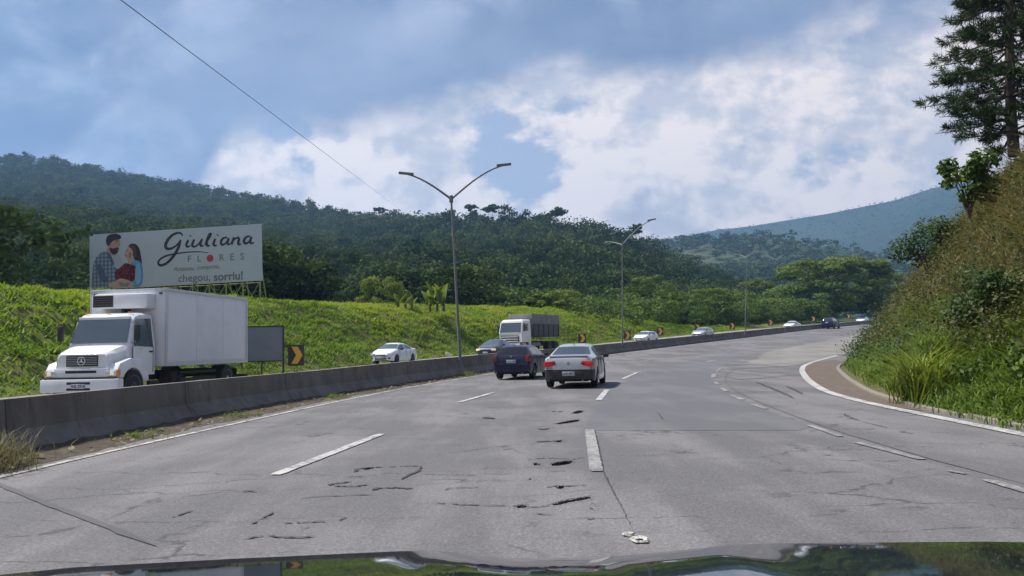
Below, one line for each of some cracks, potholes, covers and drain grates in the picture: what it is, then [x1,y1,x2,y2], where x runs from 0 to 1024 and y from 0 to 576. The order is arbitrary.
crack [304,465,422,498]
crack [243,512,318,539]
pothole [545,495,596,507]
crack [529,431,633,530]
